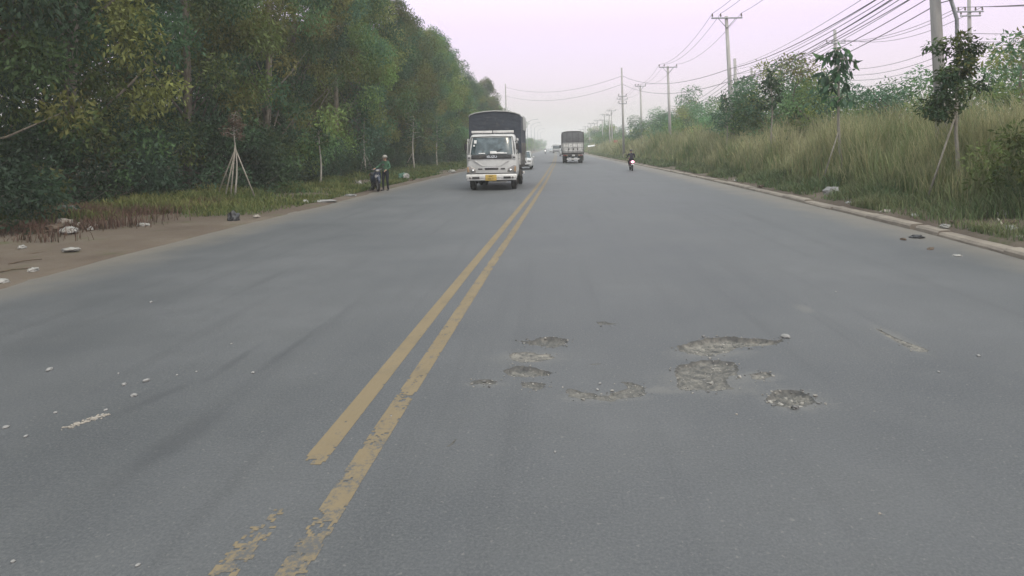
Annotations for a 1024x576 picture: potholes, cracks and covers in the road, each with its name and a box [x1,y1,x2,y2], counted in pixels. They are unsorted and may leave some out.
pothole [671,335,789,359]
pothole [503,364,556,379]
pothole [561,381,652,402]
pothole [515,335,574,349]
pothole [507,352,557,364]
pothole [669,358,745,394]
pothole [521,381,552,391]
pothole [470,378,502,388]
pothole [761,389,827,410]
pothole [744,370,775,382]
